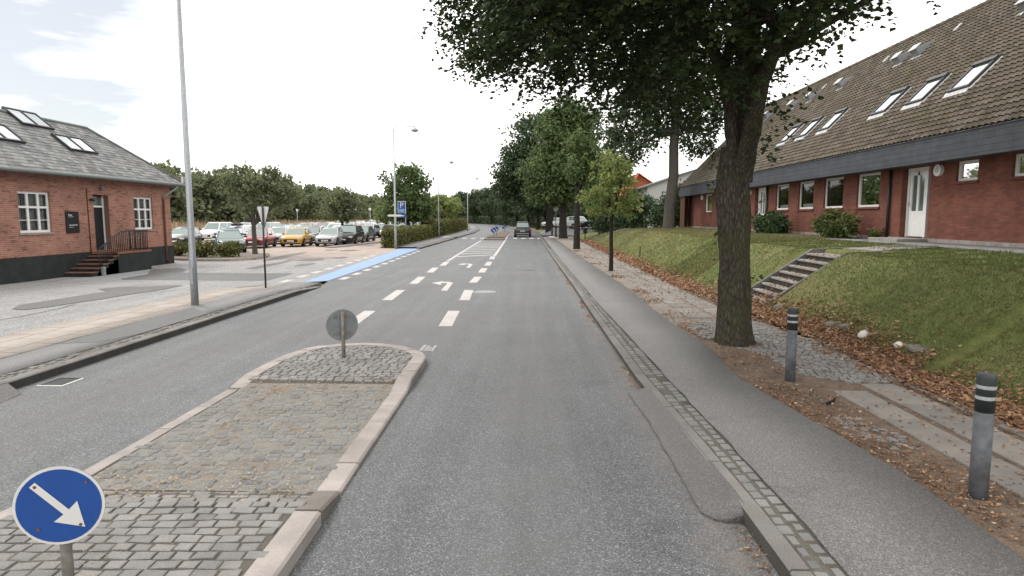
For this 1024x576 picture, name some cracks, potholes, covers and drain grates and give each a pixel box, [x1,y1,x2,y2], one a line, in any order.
drain grate [36,377,84,386]
